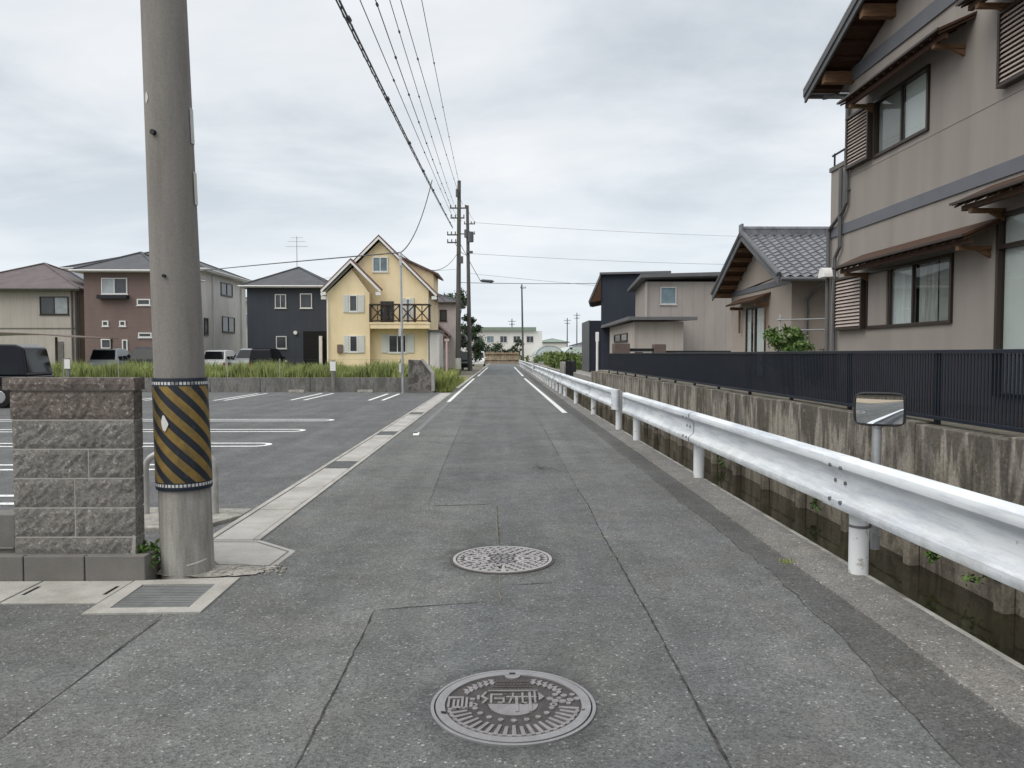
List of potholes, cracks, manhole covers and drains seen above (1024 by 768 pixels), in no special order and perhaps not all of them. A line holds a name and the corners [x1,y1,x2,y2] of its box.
drain grate [82,577,240,615]
manhole cover [450,546,555,575]
manhole cover [430,670,596,747]
